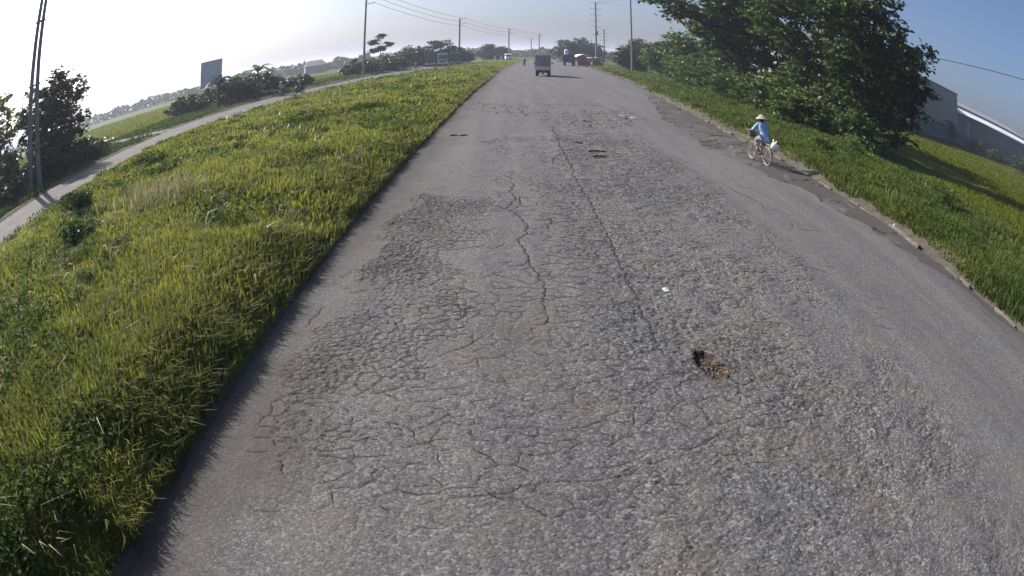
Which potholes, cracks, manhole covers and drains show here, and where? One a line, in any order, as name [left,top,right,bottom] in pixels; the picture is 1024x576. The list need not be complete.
pothole [676,344,739,386]
crack [250,133,833,567]
